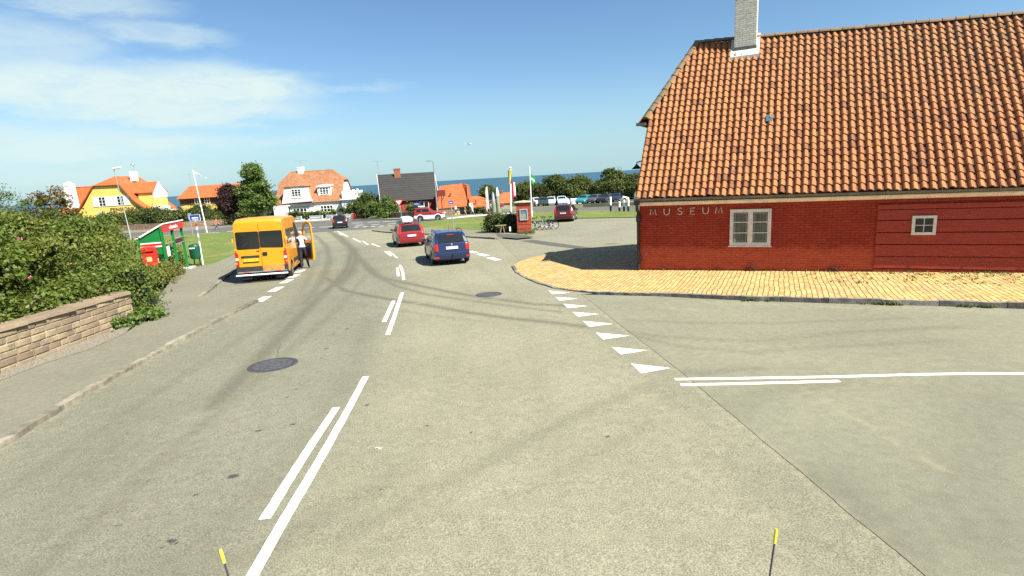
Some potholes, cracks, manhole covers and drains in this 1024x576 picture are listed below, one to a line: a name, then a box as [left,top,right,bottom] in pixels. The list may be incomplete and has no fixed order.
manhole cover [247,357,298,373]
